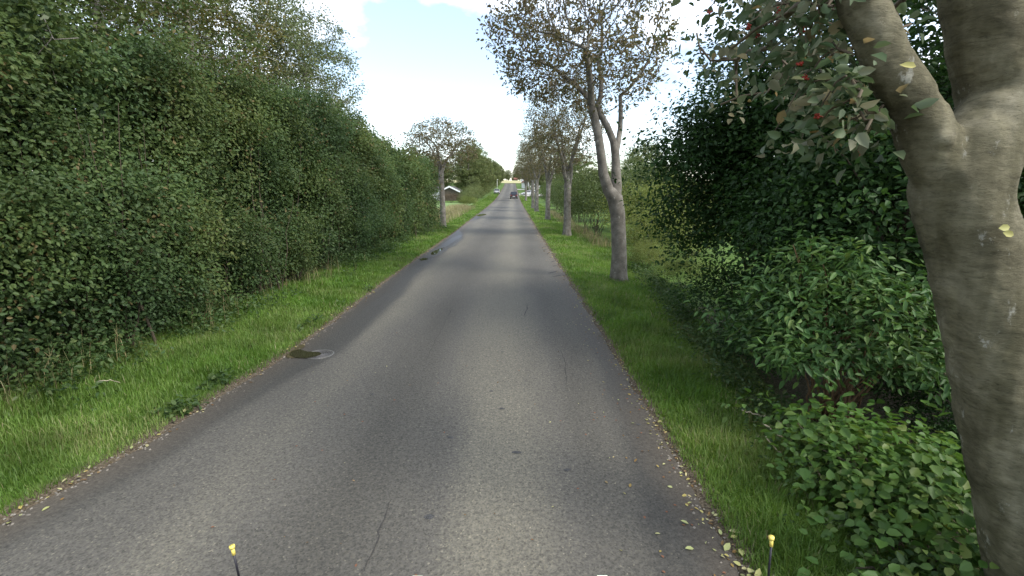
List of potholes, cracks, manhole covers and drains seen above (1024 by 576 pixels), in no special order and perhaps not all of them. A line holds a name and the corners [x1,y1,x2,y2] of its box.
crack [364,500,391,571]
